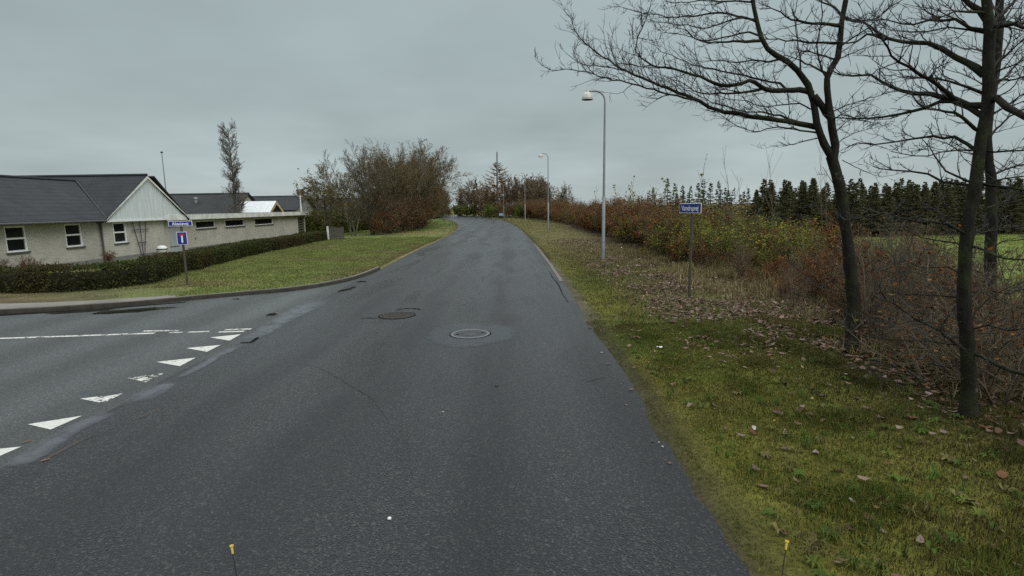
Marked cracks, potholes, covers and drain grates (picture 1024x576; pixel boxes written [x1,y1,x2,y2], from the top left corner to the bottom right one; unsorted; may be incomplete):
manhole cover [449,329,491,339]
